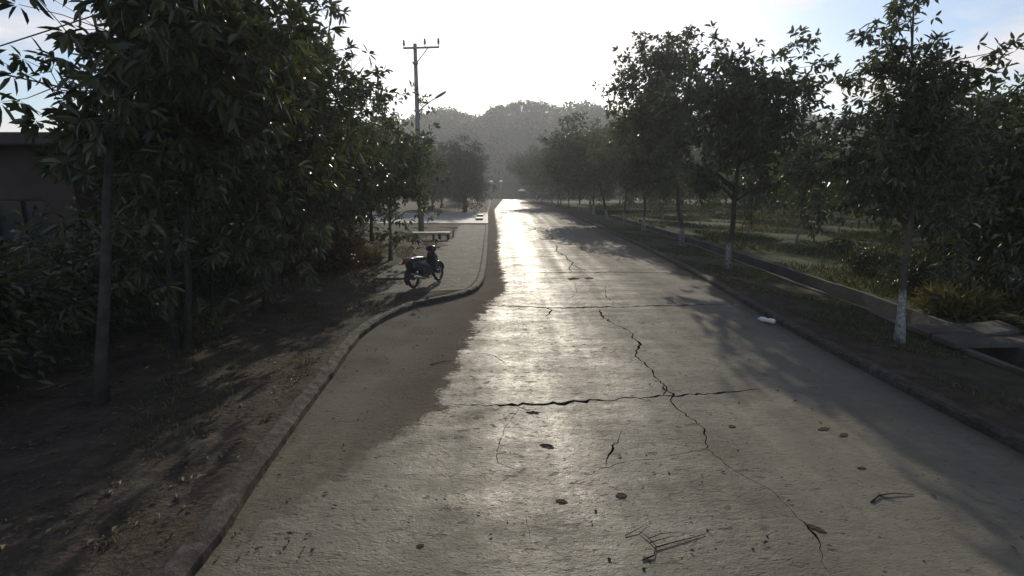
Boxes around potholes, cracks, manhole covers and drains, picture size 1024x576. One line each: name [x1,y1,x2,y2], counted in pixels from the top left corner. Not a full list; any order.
crack [454,291,829,572]
